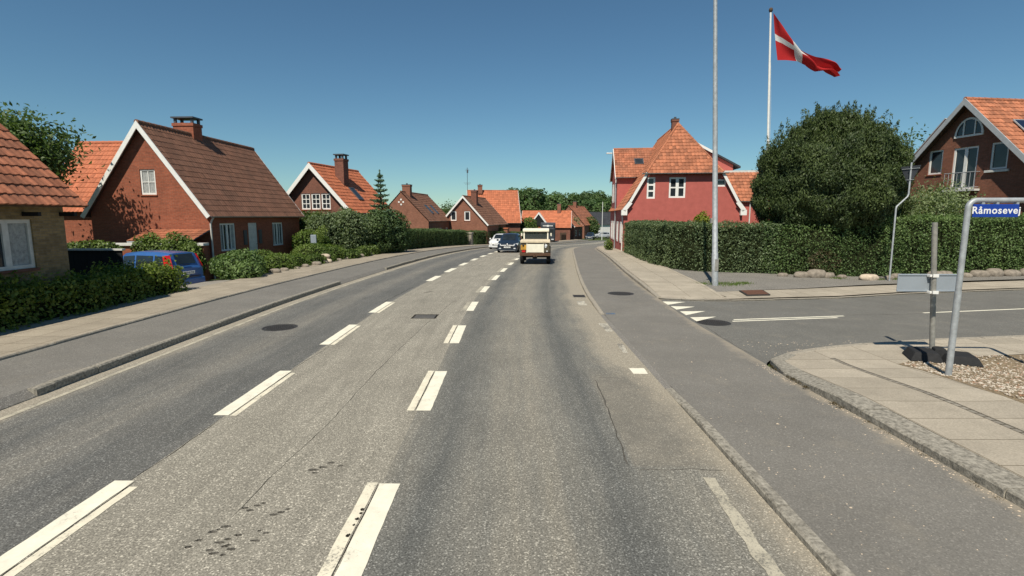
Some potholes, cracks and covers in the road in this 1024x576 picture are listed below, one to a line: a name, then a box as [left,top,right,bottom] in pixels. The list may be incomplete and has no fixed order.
pothole [206,533,242,556]
